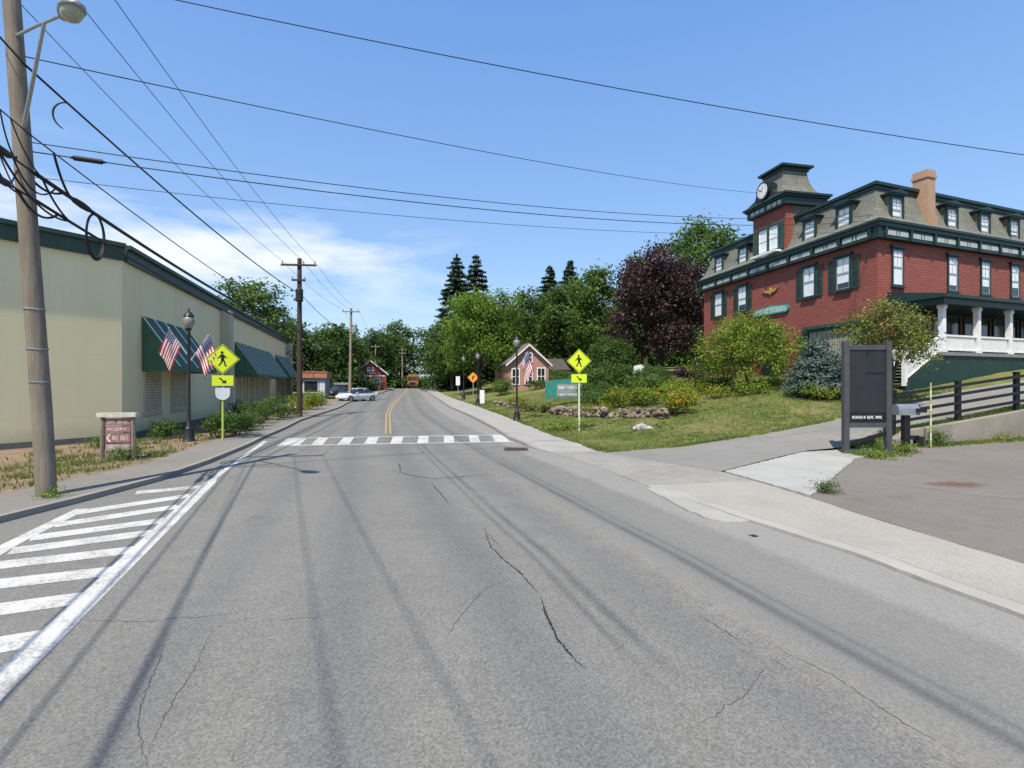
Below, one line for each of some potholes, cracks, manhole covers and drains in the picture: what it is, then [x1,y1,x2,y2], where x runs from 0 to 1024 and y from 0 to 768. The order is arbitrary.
crack [451,528,583,667]
crack [703,660,788,722]
crack [395,464,490,504]
crack [82,613,256,743]
crack [137,639,167,765]
